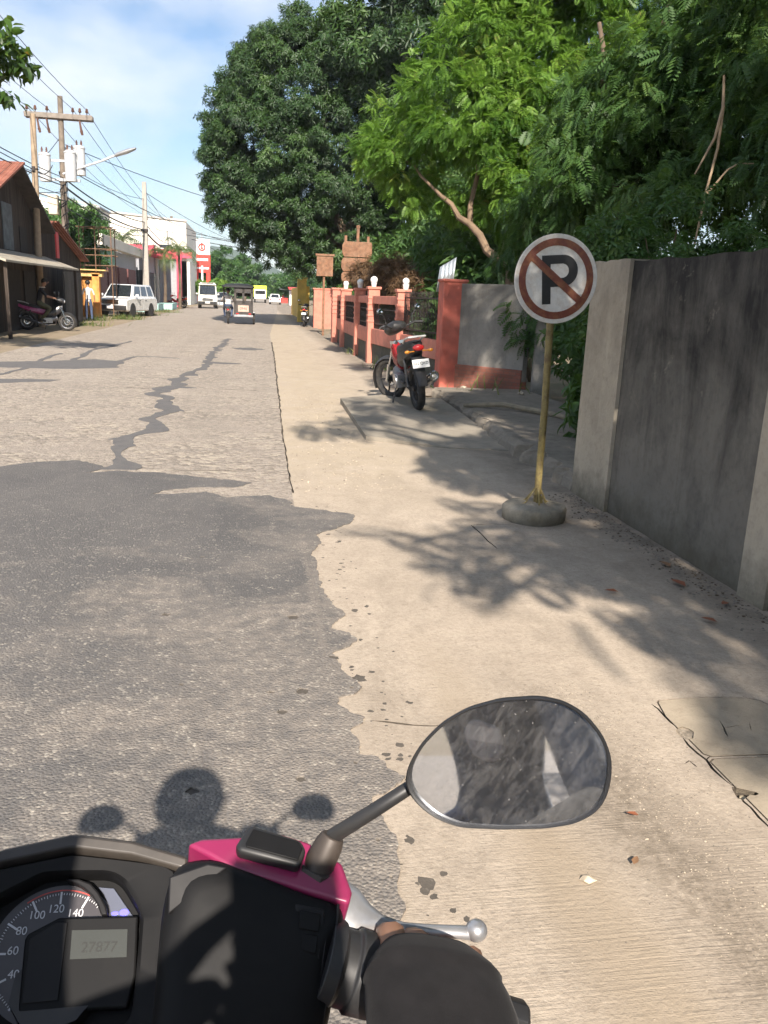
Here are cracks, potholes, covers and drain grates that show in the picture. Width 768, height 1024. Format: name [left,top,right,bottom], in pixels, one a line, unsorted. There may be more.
crack [653,705,768,826]
